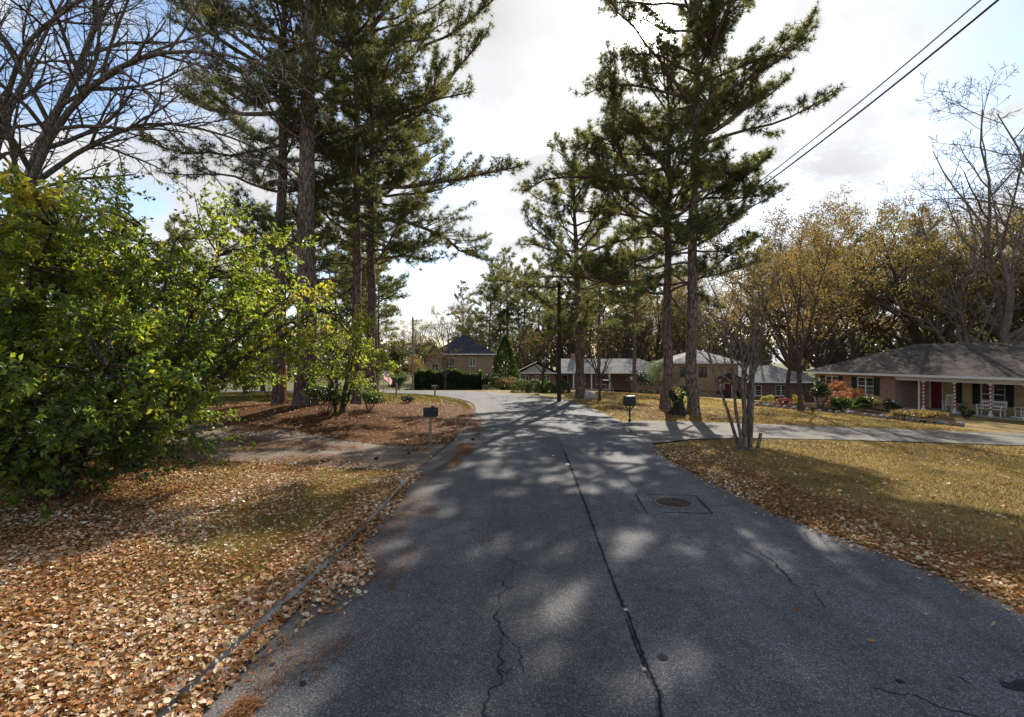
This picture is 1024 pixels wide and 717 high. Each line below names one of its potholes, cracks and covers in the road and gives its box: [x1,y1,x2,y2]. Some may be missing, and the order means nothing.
crack [481,552,524,717]
crack [870,676,978,717]
crack [759,550,826,607]
manhole cover [653,497,694,509]
